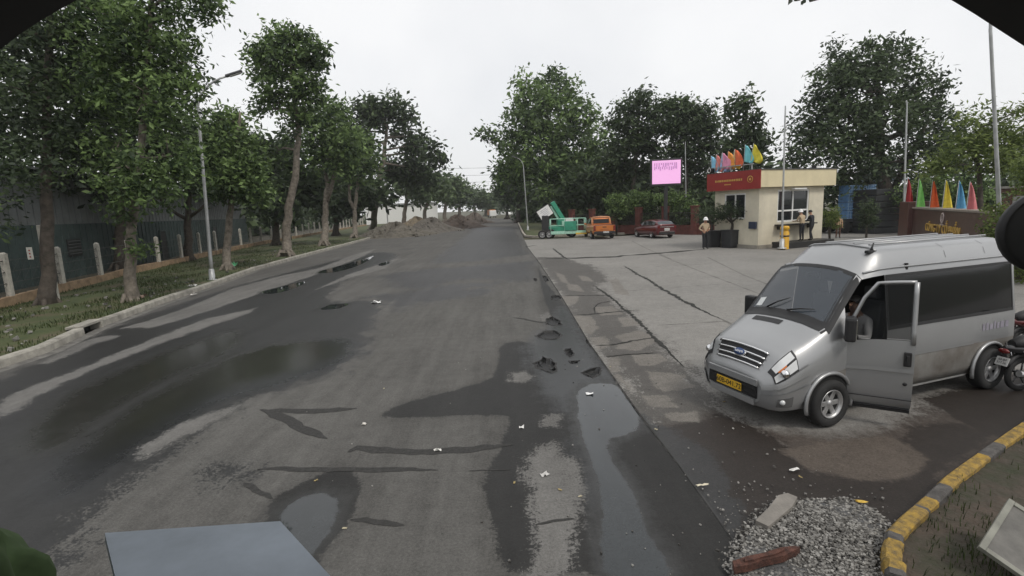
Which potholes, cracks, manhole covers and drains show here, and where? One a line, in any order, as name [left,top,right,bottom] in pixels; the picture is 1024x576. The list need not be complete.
drain grate [65,319,104,332]
pothole [535,330,563,339]
pothole [581,367,602,378]
pothole [532,356,557,373]
crack [526,245,723,320]
pothole [545,316,562,326]
